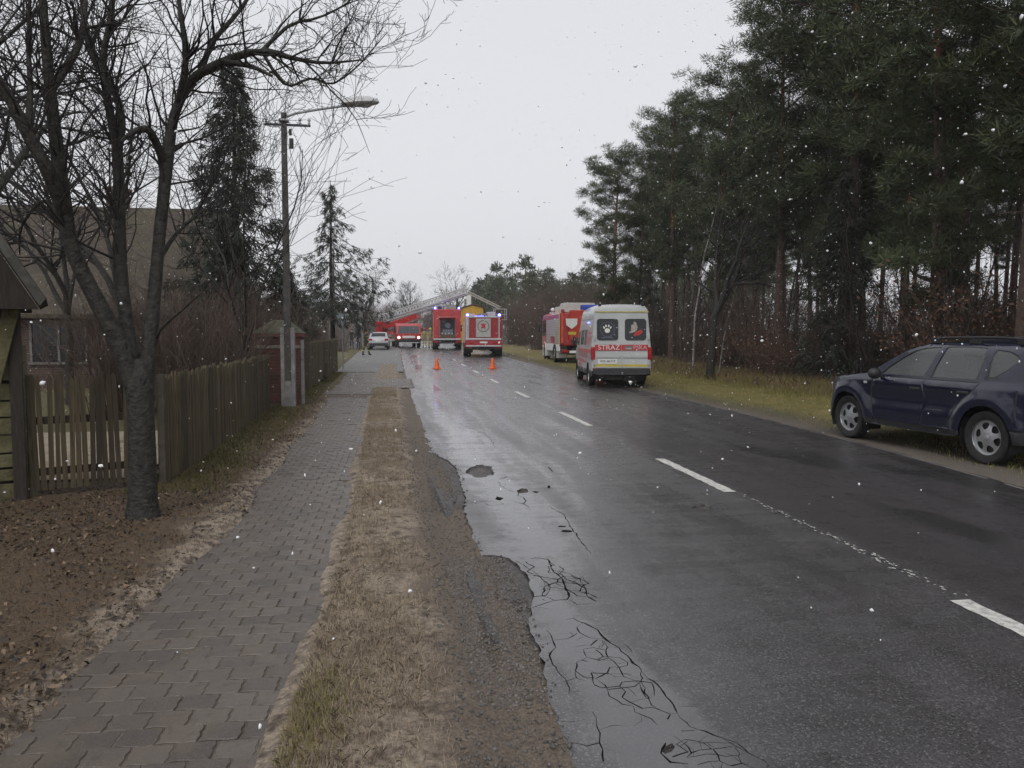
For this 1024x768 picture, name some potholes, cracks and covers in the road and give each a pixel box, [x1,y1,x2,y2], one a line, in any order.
pothole [465,465,494,478]
crack [542,618,772,768]
crack [517,507,596,610]
